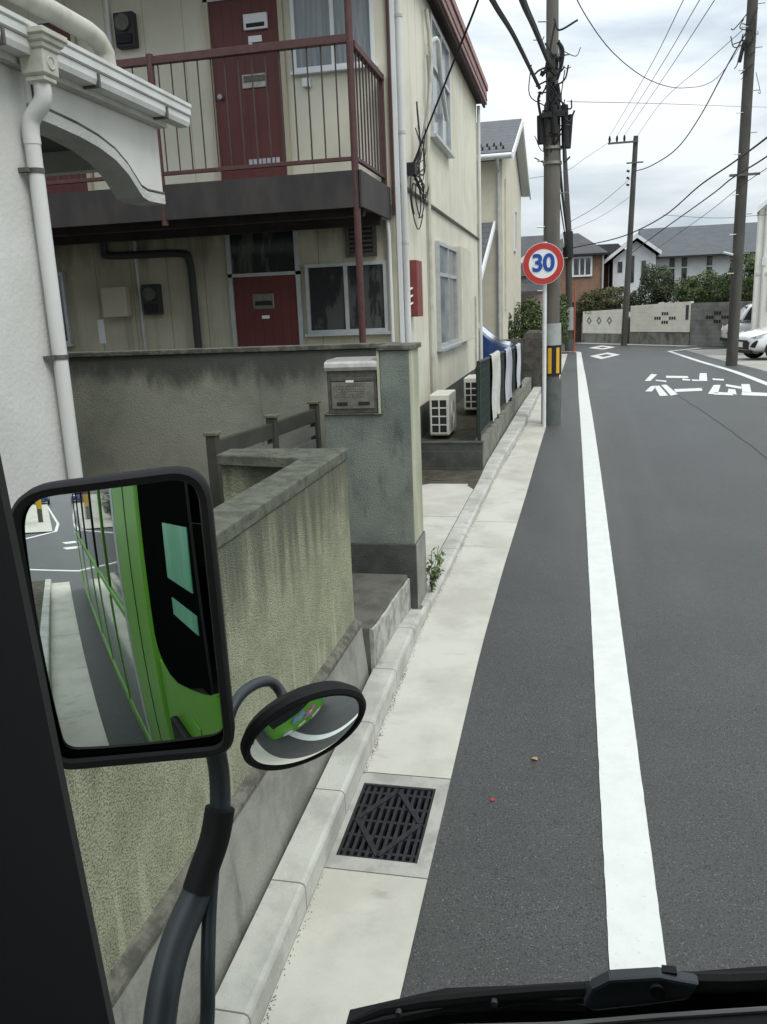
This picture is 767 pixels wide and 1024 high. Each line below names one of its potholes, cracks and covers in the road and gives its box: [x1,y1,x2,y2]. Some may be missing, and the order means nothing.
drain grate [325,772,451,944]
